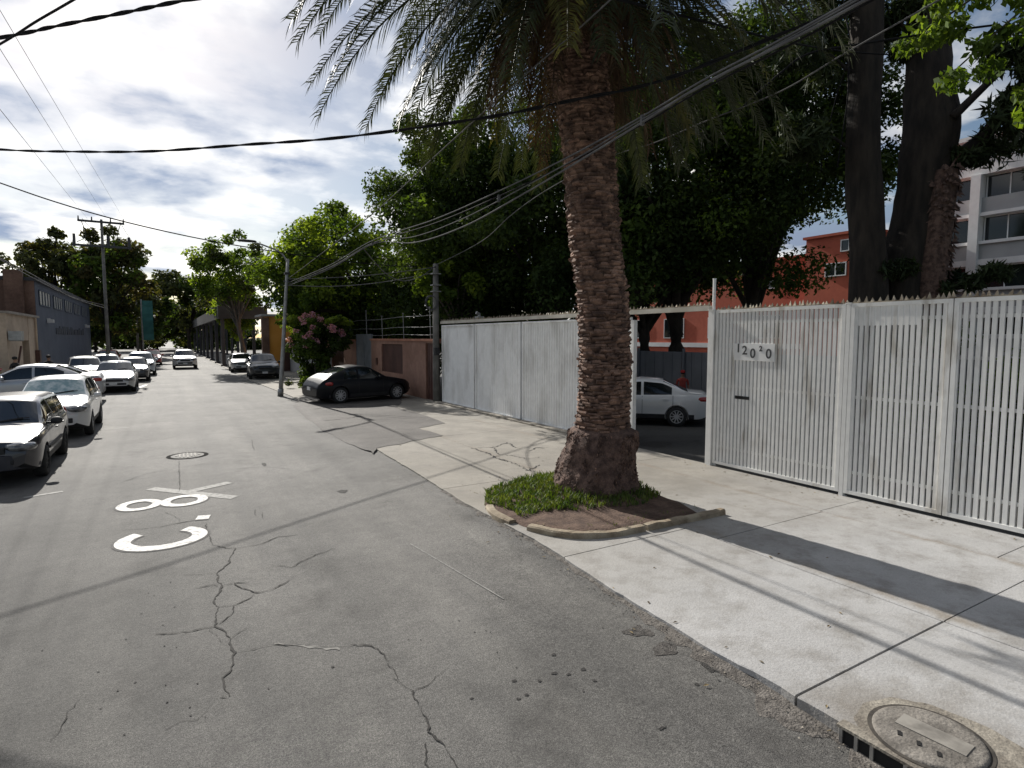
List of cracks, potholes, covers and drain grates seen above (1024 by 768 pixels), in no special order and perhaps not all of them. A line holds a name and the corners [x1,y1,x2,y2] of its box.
pothole [622,625,654,636]
manhole cover [854,697,1024,768]
crack [478,442,549,474]
pothole [653,642,678,656]
crack [131,512,458,768]
